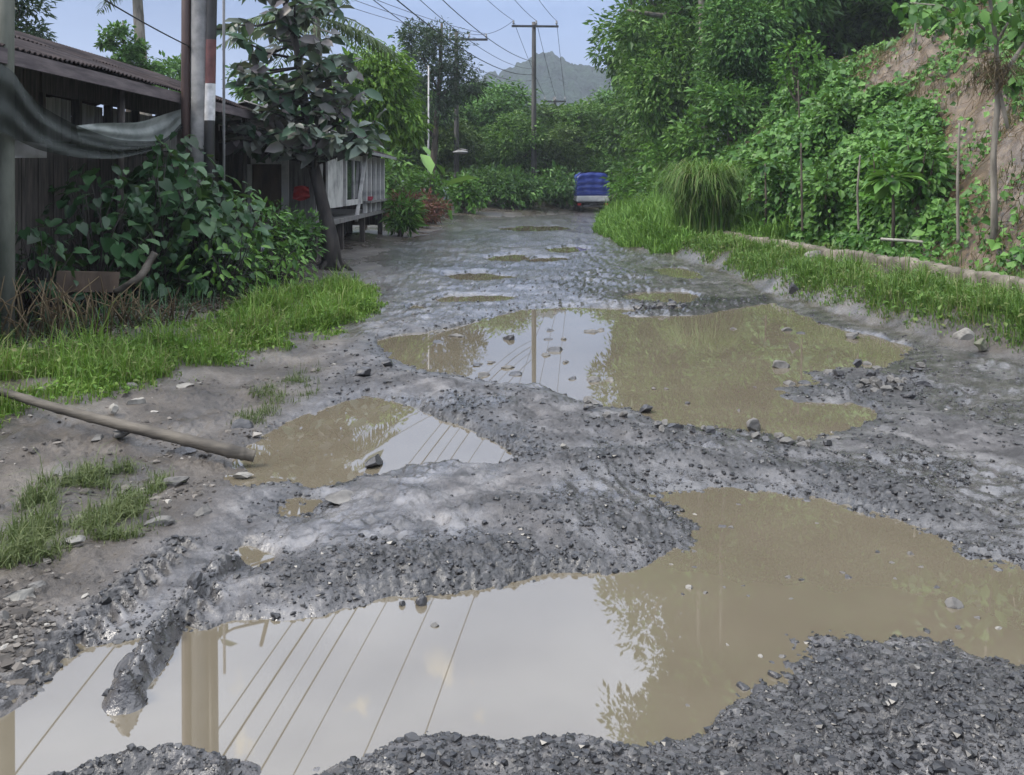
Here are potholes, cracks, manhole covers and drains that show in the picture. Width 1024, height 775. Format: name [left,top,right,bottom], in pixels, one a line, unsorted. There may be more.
pothole [0,475,1024,775]
pothole [521,254,582,262]
pothole [203,388,545,492]
pothole [421,290,524,303]
pothole [432,267,529,281]
pothole [363,294,926,443]
pothole [476,250,535,263]
